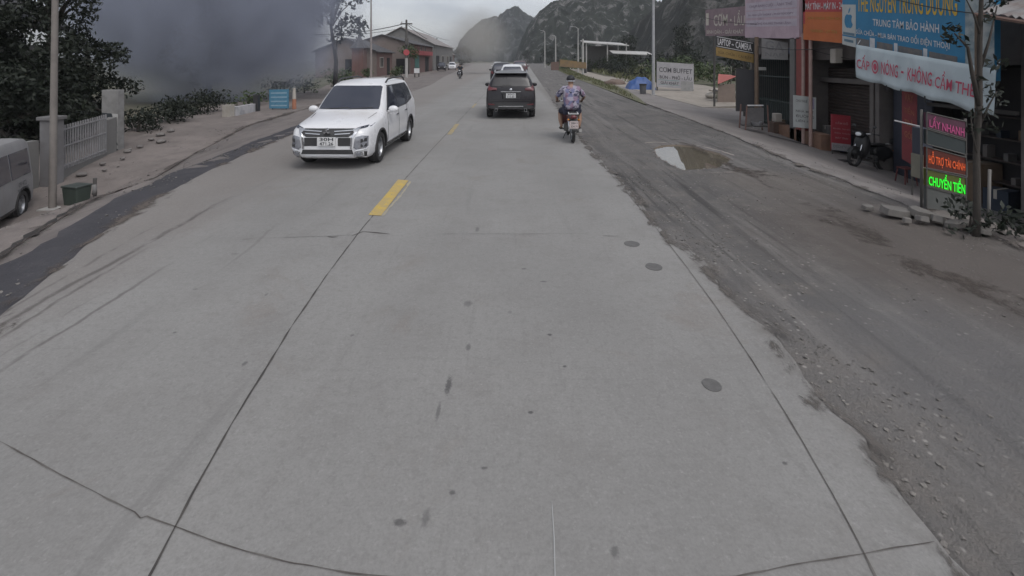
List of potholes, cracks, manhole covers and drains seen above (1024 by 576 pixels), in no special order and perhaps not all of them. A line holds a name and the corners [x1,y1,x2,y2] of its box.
pothole [645,142,737,173]
